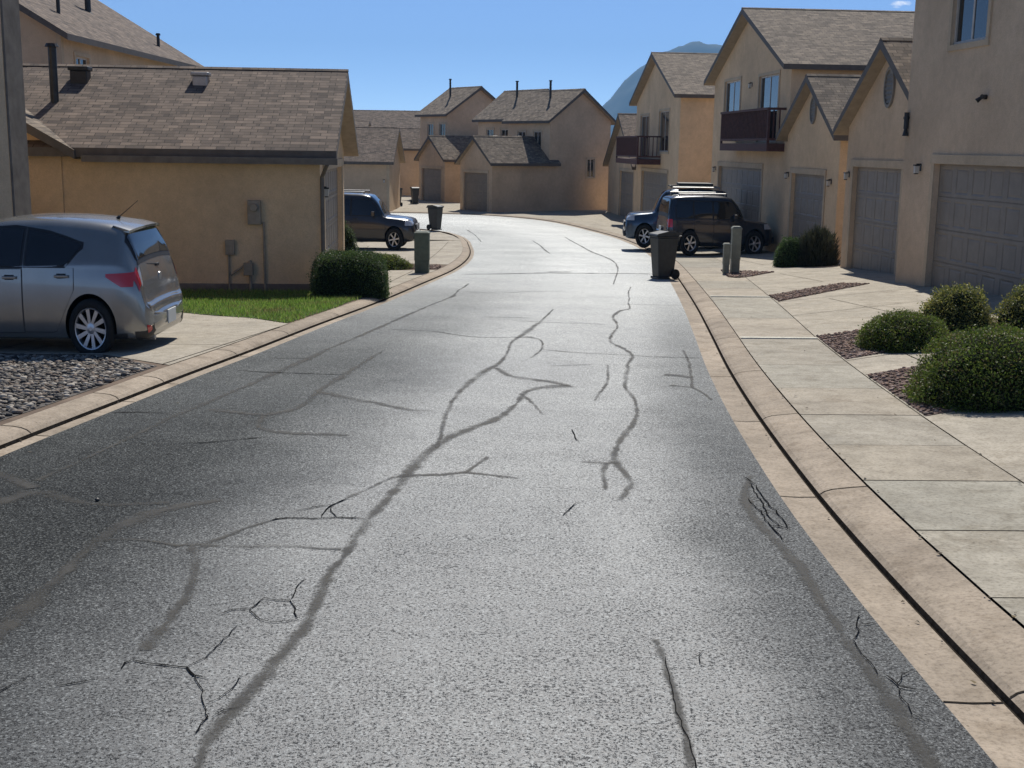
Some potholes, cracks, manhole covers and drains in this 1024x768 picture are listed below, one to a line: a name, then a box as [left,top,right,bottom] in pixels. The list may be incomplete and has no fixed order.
crack [853,614,925,721]
crack [745,477,789,539]
crack [665,652,703,768]
crack [272,498,356,520]
crack [121,579,304,733]
